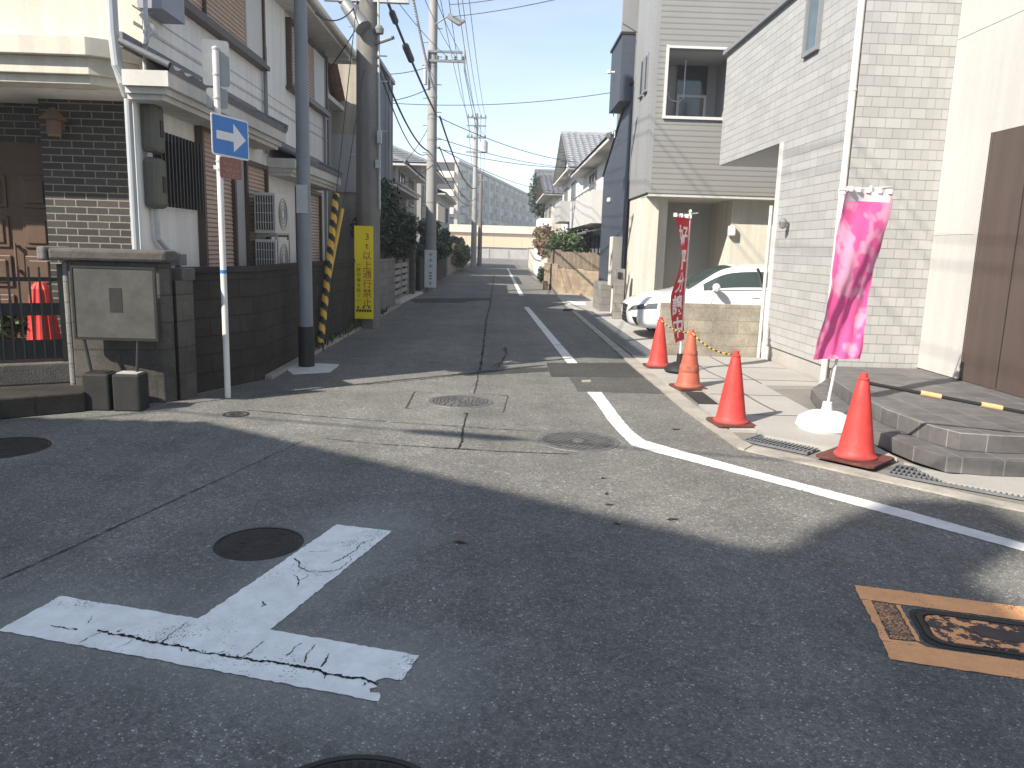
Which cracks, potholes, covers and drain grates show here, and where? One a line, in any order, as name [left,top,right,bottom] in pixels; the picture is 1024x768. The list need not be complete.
manhole cover [298,754,422,768]
manhole cover [0,437,52,458]
manhole cover [213,527,304,561]
crack [293,540,372,585]
manhole cover [537,431,620,452]
drain grate [743,434,820,456]
drain grate [887,464,1024,501]
crack [51,616,378,685]
manhole cover [428,395,493,408]
